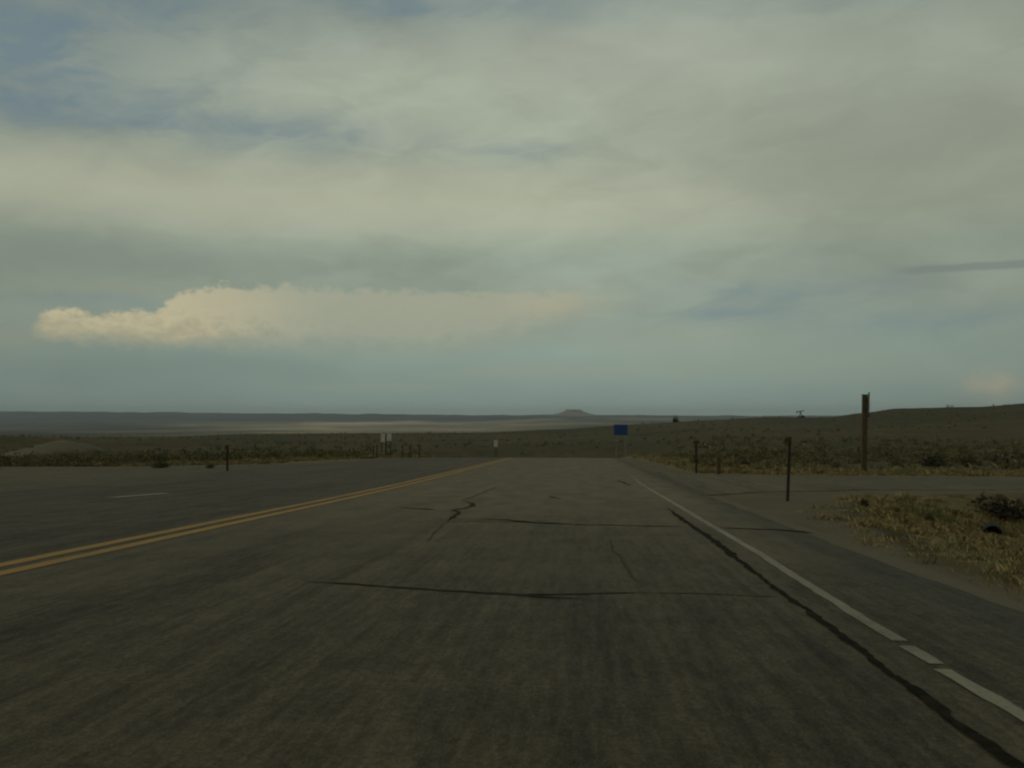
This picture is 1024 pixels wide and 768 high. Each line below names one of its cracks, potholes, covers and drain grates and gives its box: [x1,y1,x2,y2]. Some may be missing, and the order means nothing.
crack [307,519,683,598]
crack [400,486,497,541]
